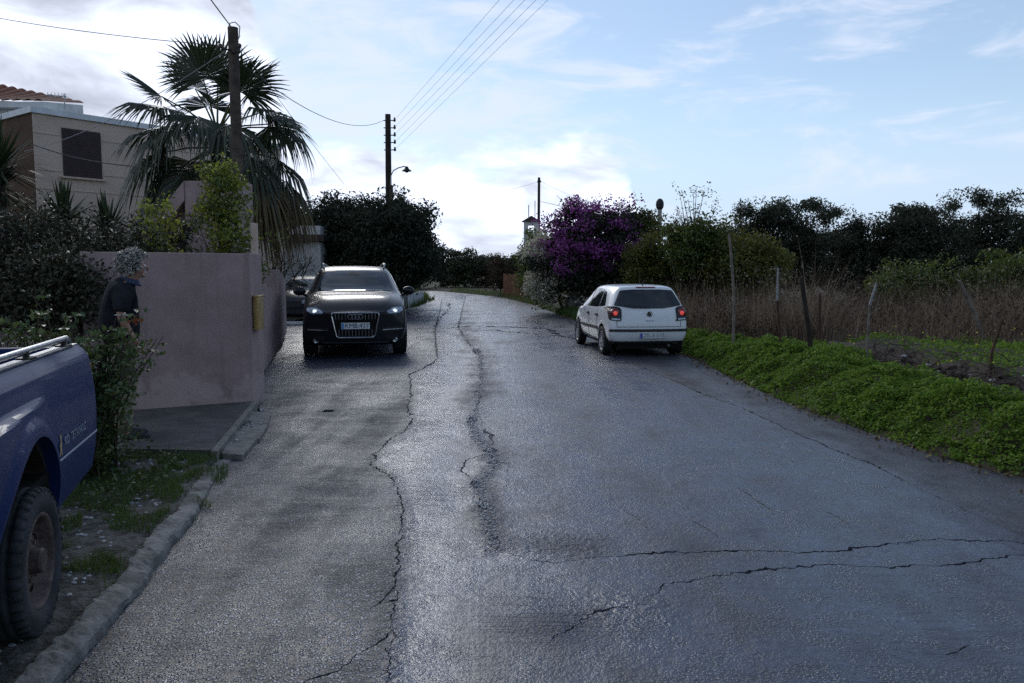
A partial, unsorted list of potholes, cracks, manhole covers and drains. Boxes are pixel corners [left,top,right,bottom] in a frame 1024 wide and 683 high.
crack [304,298,1024,683]
